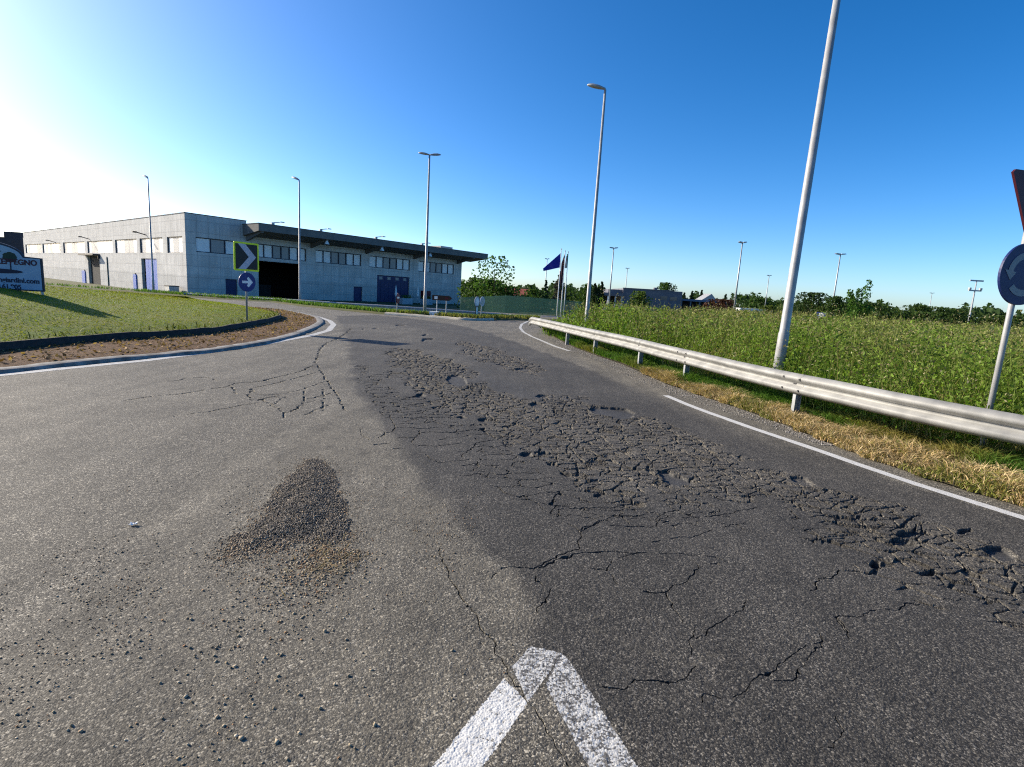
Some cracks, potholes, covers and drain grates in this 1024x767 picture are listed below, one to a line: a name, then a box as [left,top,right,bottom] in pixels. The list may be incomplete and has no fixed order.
pothole [911,568,941,577]
pothole [868,559,881,571]
pothole [979,545,1020,562]
crack [354,339,1024,767]
crack [125,329,352,418]
